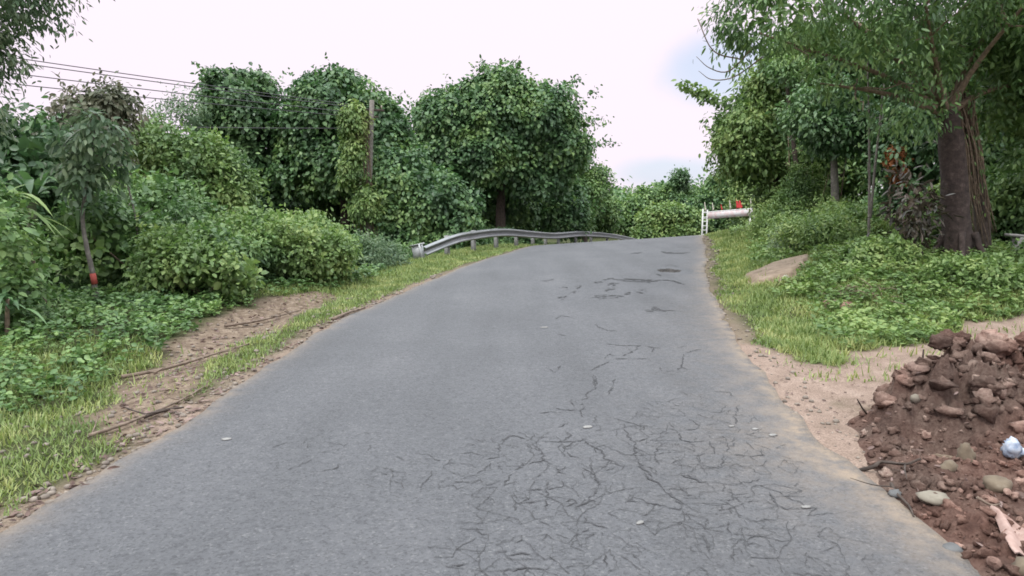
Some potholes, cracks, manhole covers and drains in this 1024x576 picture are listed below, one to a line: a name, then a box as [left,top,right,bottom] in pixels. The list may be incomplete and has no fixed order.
crack [256,424,379,473]
pothole [644,267,694,275]
crack [365,316,883,576]
